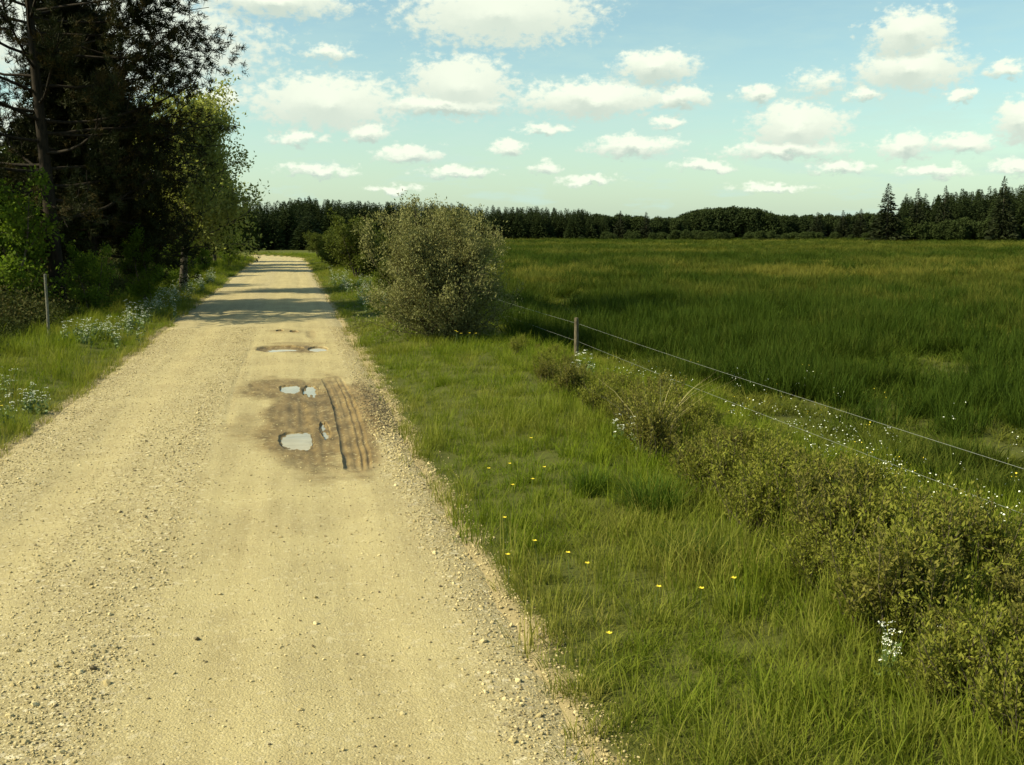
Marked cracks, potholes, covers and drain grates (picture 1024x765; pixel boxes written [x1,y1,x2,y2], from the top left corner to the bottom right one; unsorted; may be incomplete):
pothole [279,385,300,394]
pothole [277,432,313,451]
pothole [255,344,305,352]
pothole [302,384,318,398]
pothole [319,421,331,440]
